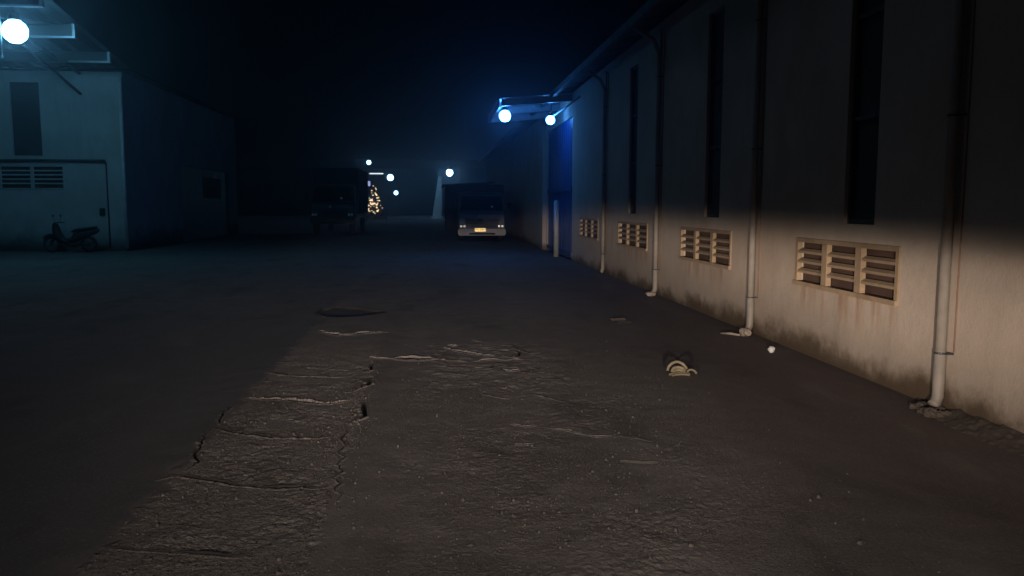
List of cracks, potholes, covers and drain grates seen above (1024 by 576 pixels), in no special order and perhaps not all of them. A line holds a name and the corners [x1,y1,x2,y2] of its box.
crack [154,364,375,502]
crack [509,424,652,446]
pothole [314,306,387,317]
crack [443,340,553,374]
